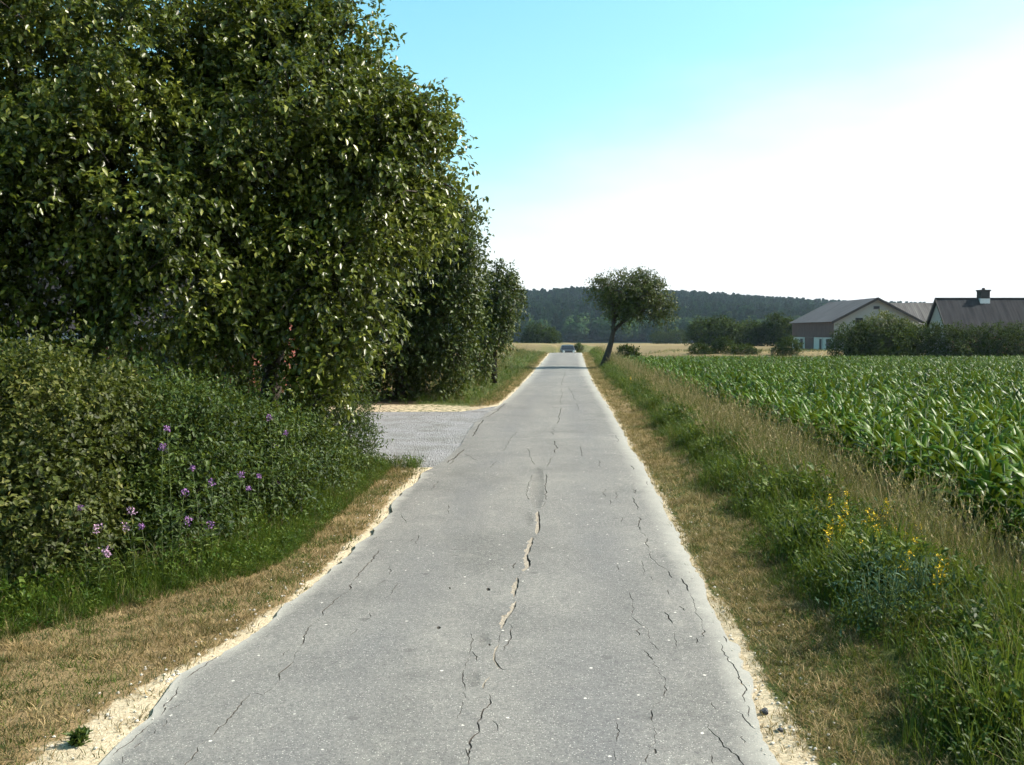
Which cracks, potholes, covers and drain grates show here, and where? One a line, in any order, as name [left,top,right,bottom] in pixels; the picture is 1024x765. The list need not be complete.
crack [605,466,755,765]
crack [447,404,504,465]
crack [113,657,216,764]
crack [457,371,576,763]
crack [185,537,399,765]
